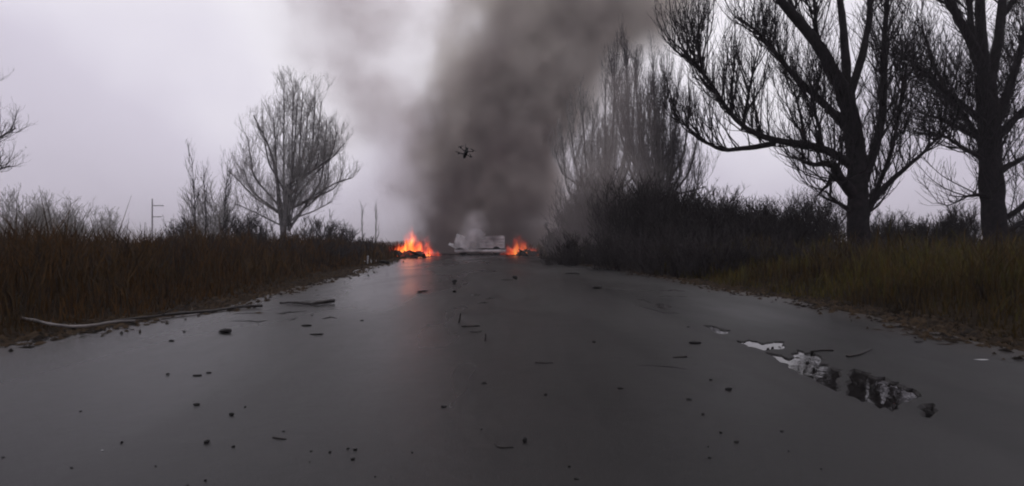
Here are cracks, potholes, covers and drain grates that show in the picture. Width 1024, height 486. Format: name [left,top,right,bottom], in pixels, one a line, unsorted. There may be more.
pothole [844,368,922,412]
pothole [917,403,939,418]
pothole [737,340,786,353]
pothole [703,325,731,334]
pothole [765,349,842,392]
